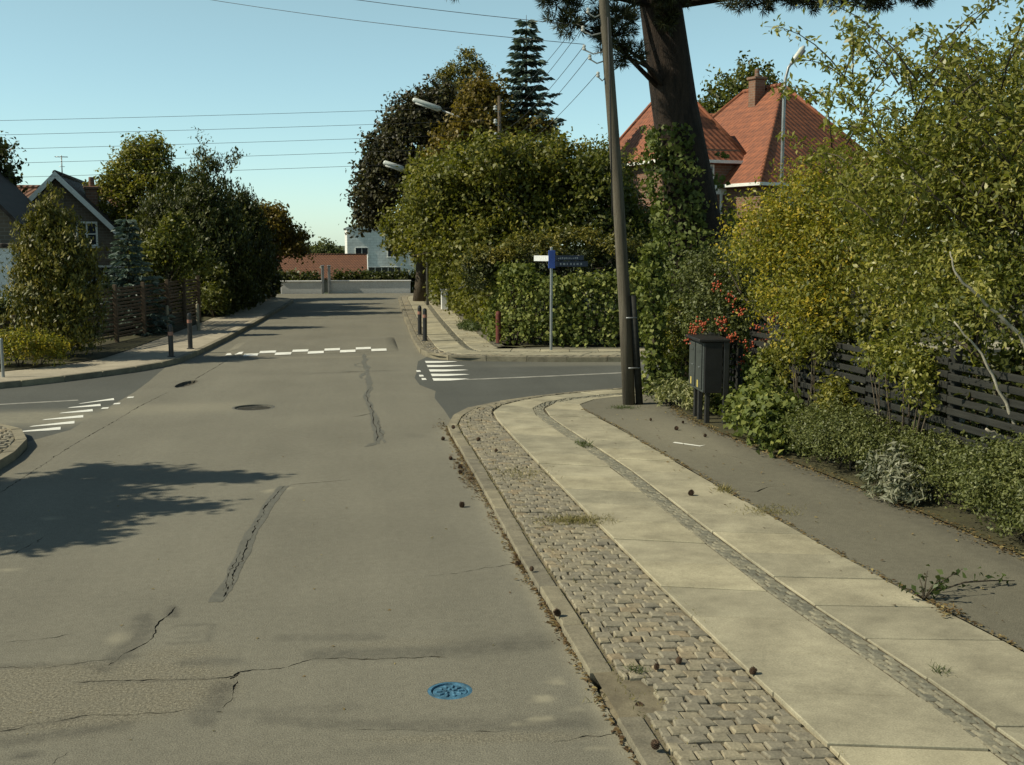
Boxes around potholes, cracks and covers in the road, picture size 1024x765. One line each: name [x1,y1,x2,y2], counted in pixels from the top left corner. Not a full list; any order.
crack [0,608,441,713]
manhole cover [427,682,472,700]
